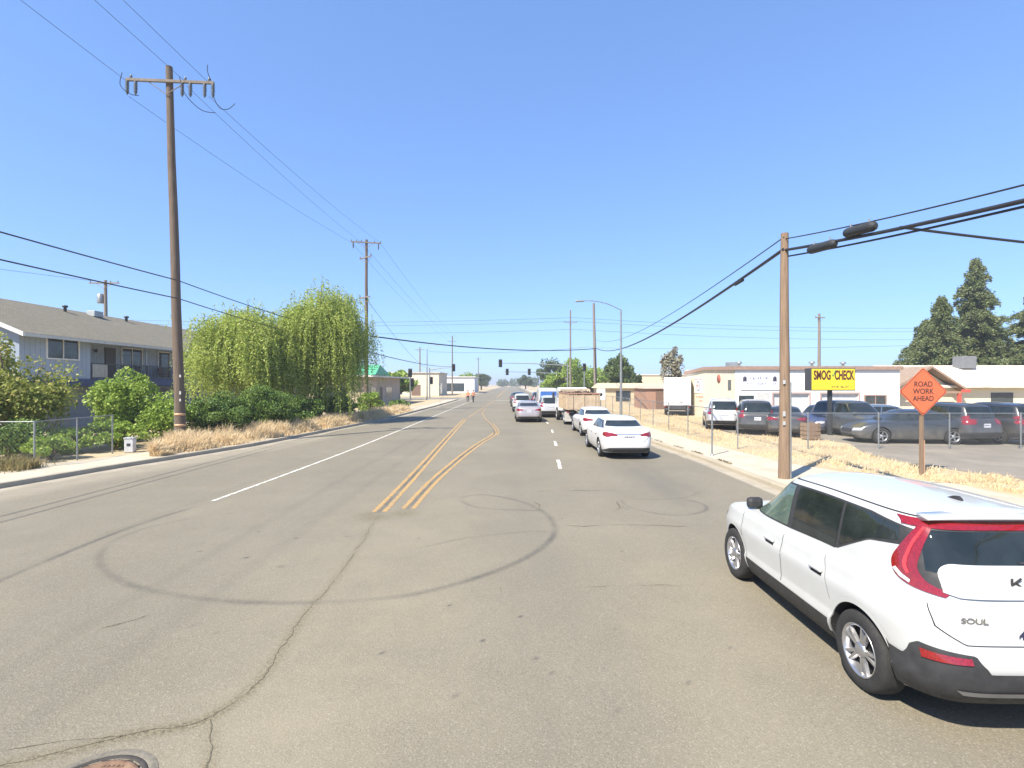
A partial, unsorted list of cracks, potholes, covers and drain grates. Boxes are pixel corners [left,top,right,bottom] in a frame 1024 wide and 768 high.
manhole cover [63,749,158,768]
crack [0,530,369,768]
